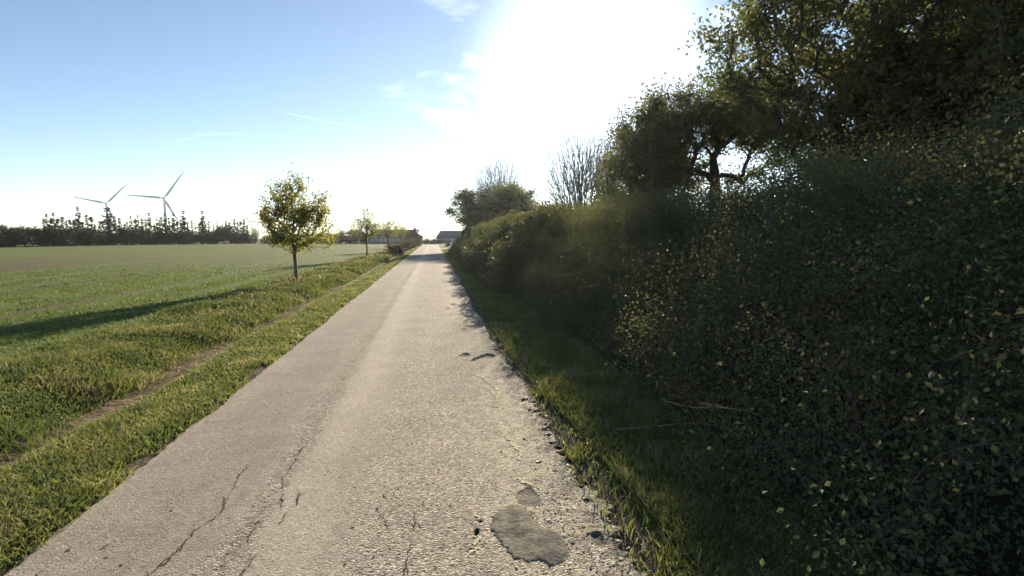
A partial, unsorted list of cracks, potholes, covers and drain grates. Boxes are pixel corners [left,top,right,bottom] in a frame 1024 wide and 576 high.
crack [239,446,306,576]
crack [146,464,250,576]
